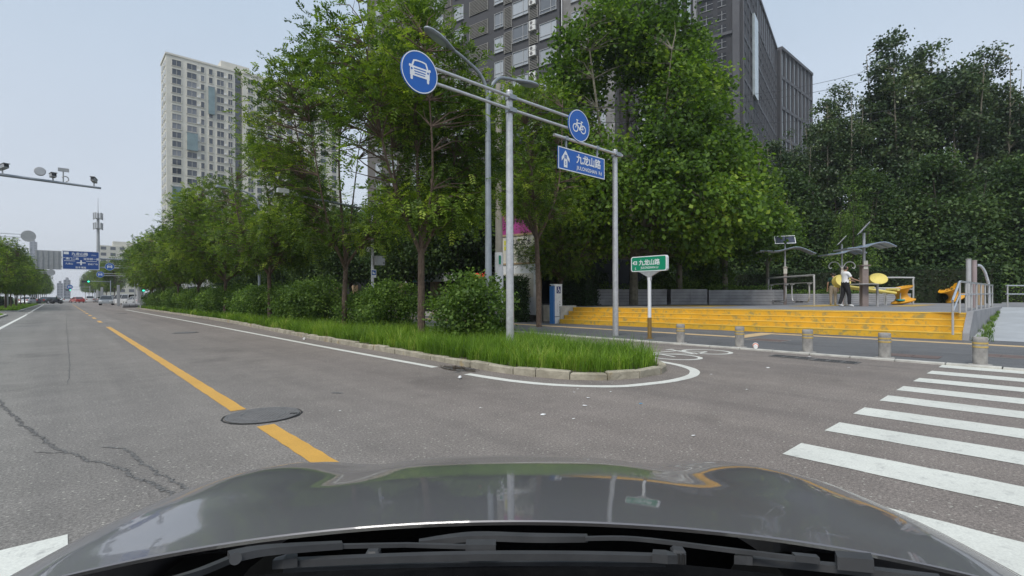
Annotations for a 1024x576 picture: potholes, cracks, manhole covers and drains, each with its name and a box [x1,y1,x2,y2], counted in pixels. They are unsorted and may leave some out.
crack [0,399,189,496]
manhole cover [220,407,303,425]
